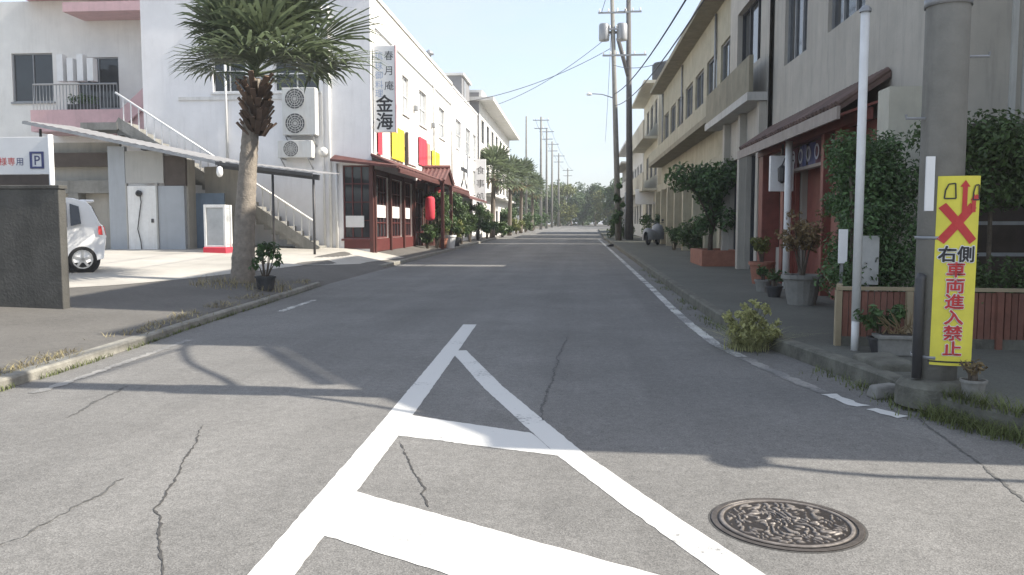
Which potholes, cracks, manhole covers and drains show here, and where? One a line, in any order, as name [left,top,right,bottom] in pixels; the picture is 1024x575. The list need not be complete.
manhole cover [708,498,869,553]
crack [400,443,429,507]
crack [540,337,567,421]
crack [153,426,202,575]
crack [0,478,123,545]
